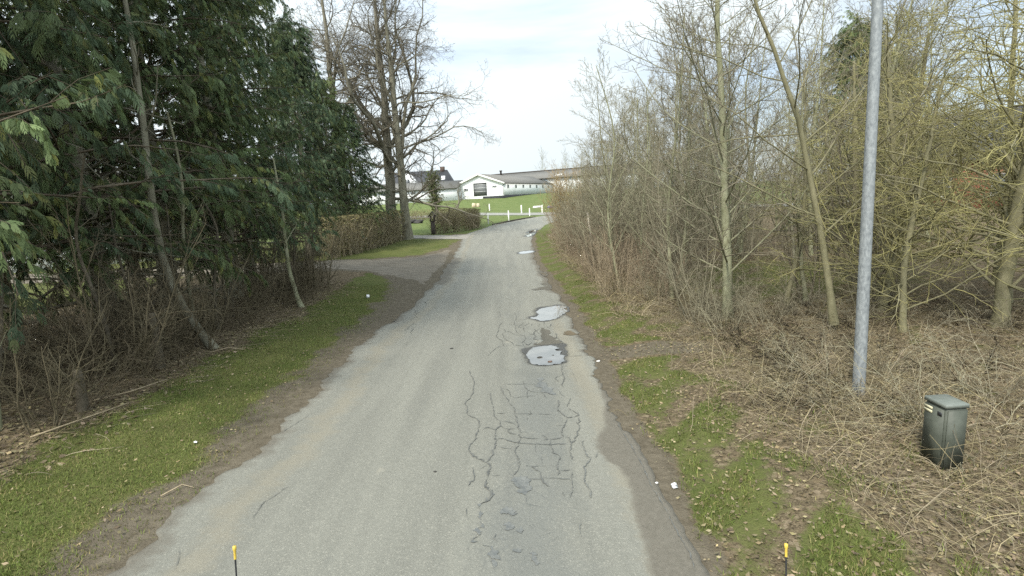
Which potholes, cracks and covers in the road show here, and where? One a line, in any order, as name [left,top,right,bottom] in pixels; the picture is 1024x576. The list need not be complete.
pothole [522,343,568,366]
crack [464,311,597,534]
